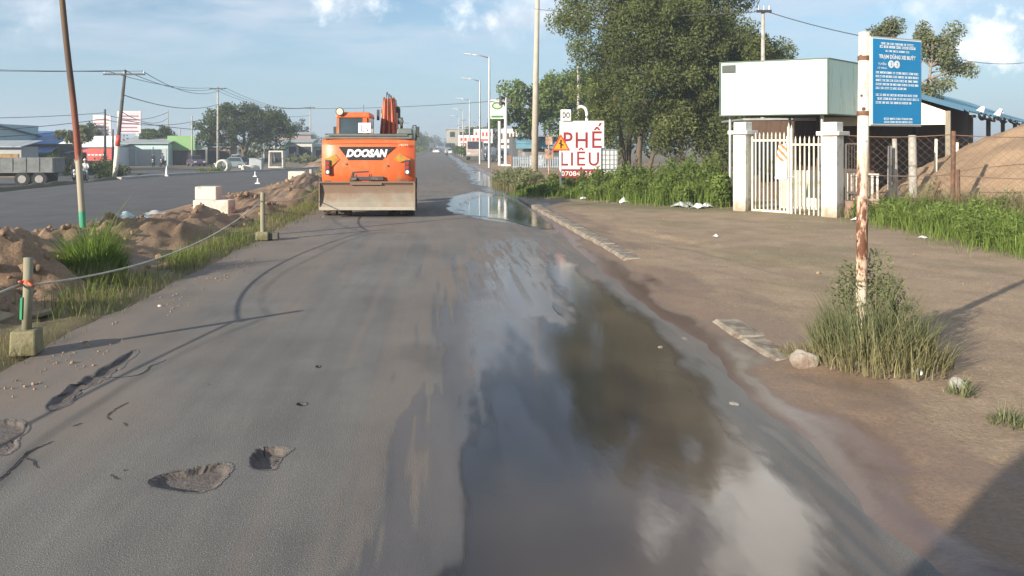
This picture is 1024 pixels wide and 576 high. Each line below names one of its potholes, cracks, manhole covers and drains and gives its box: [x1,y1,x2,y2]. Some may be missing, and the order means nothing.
pothole [44,349,139,411]
pothole [247,445,295,471]
pothole [146,461,235,494]
crack [0,441,53,479]
pothole [0,418,31,456]
